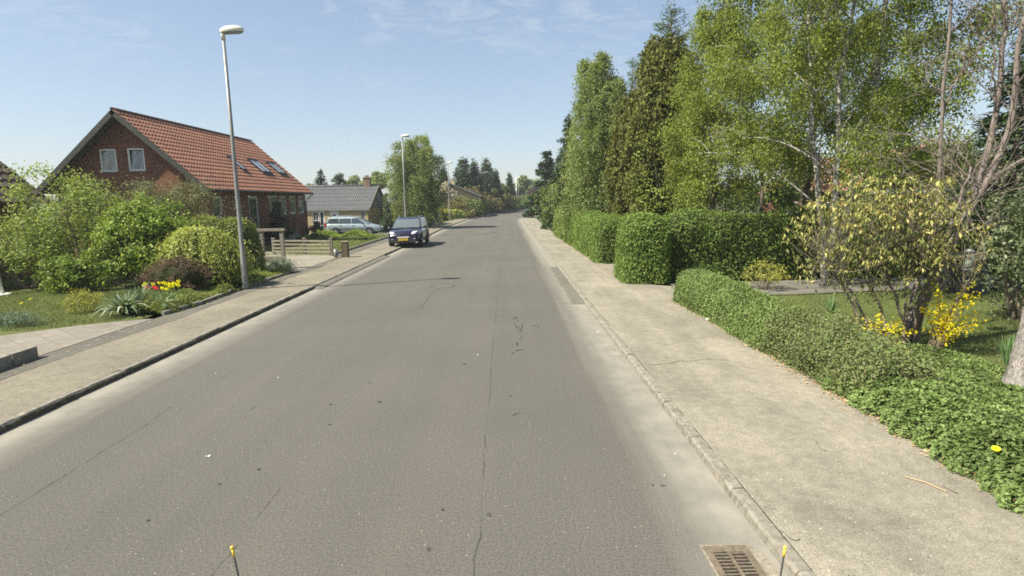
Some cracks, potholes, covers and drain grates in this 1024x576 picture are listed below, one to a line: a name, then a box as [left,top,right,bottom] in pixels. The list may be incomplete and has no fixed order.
drain grate [703,545,767,576]
